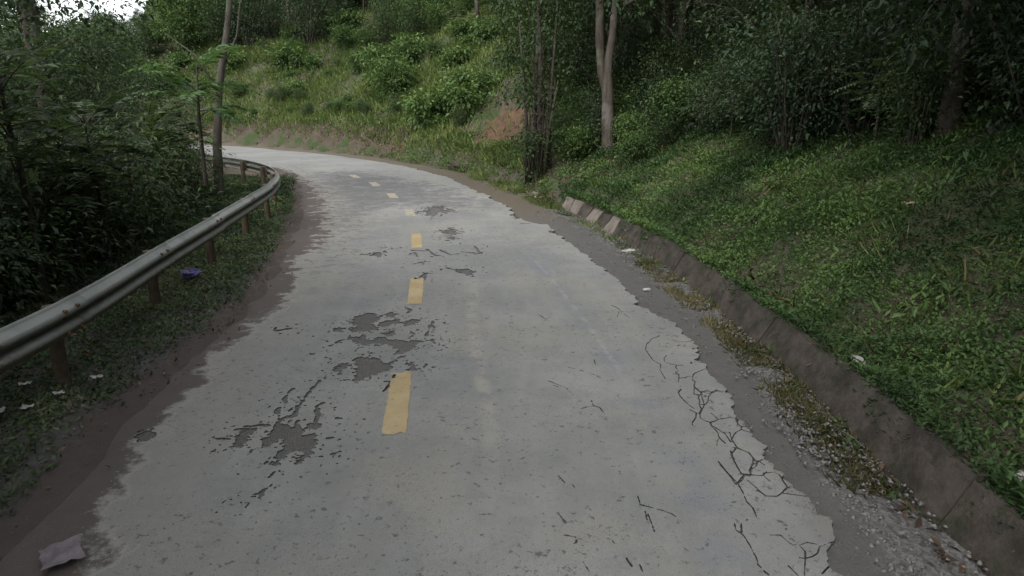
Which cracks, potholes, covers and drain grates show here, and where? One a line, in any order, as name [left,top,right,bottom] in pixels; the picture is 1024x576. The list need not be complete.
crack [637,496,676,532]
pothole [433,224,472,245]
pothole [312,305,435,341]
crack [645,336,812,576]
pothole [309,342,463,391]
crack [777,535,834,576]
pothole [309,315,450,370]
pothole [215,371,366,523]
pothole [415,205,460,218]
